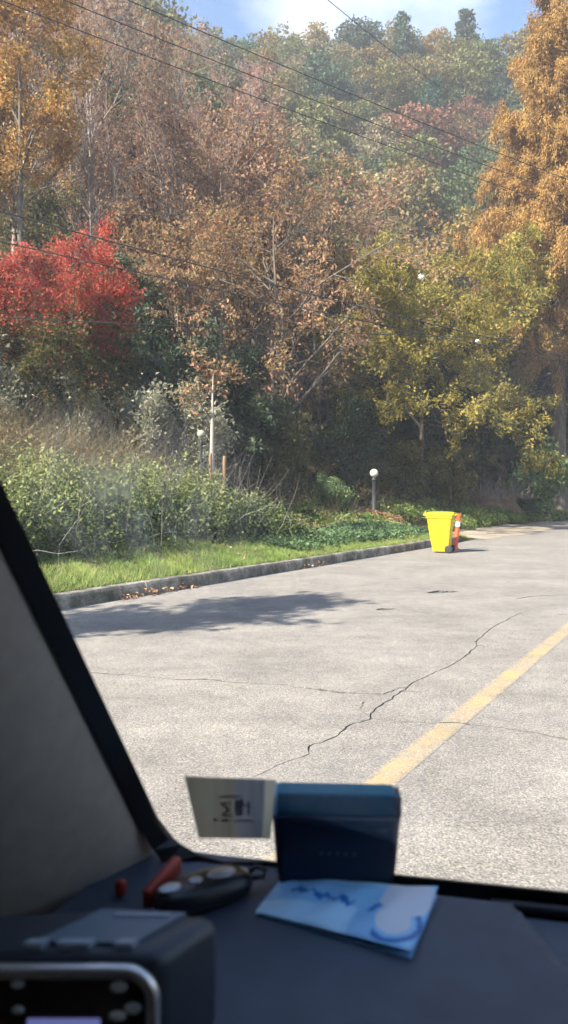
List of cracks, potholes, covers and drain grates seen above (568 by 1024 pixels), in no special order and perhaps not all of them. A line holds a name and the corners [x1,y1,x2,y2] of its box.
crack [90,610,568,776]
